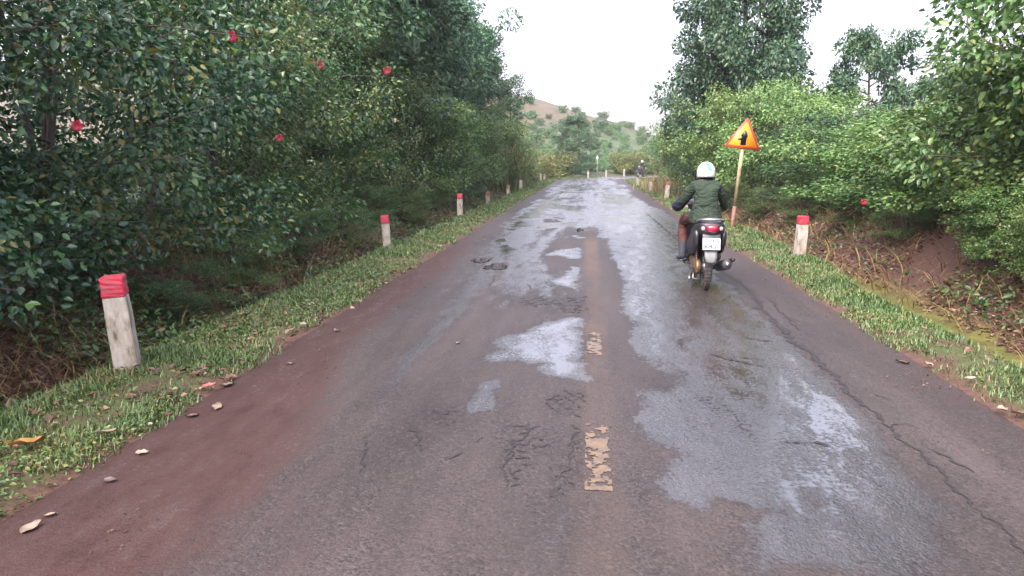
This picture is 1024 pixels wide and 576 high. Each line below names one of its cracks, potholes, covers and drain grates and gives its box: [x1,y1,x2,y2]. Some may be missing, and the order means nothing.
crack [488,276,589,312]
crack [500,389,585,498]
crack [648,214,1024,552]
crack [405,407,483,459]
pothole [483,262,507,270]
